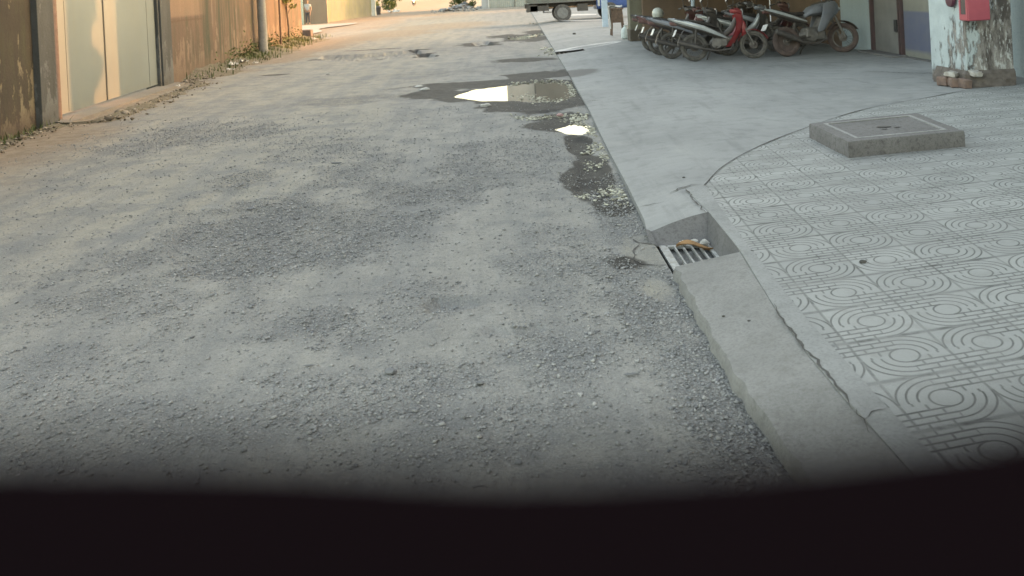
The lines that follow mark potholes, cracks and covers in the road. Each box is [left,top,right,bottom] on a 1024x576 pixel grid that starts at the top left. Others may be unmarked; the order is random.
manhole cover [809,113,965,158]
pothole [542,123,598,136]
crack [629,238,663,265]
pothole [315,49,426,61]
pothole [505,32,544,40]
crack [774,304,881,426]
pothole [449,81,580,103]
pothole [555,135,630,205]
drain grate [645,212,739,274]
